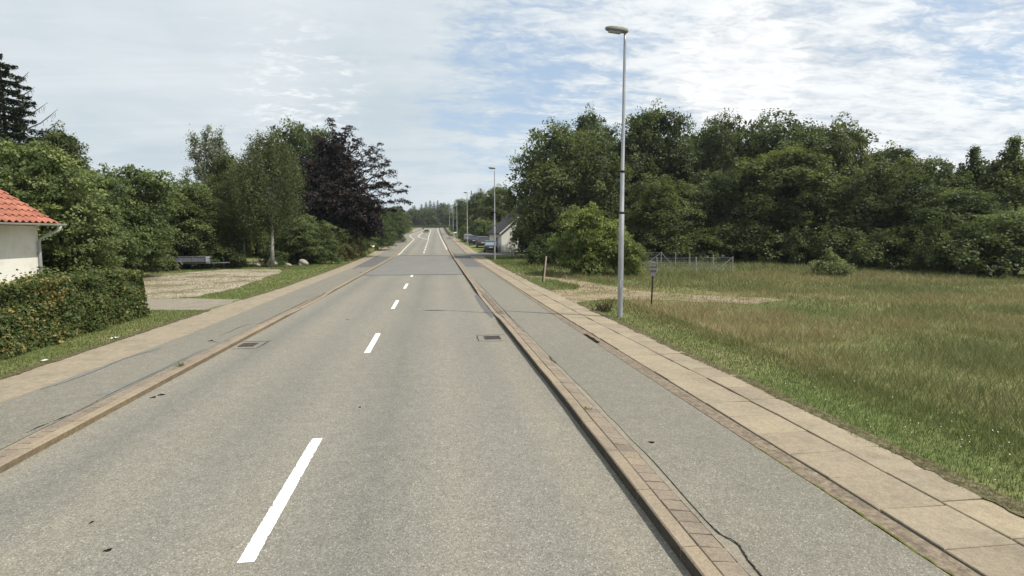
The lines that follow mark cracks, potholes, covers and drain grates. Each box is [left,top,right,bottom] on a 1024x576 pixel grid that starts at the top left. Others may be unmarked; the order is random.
crack [647,454,762,576]
